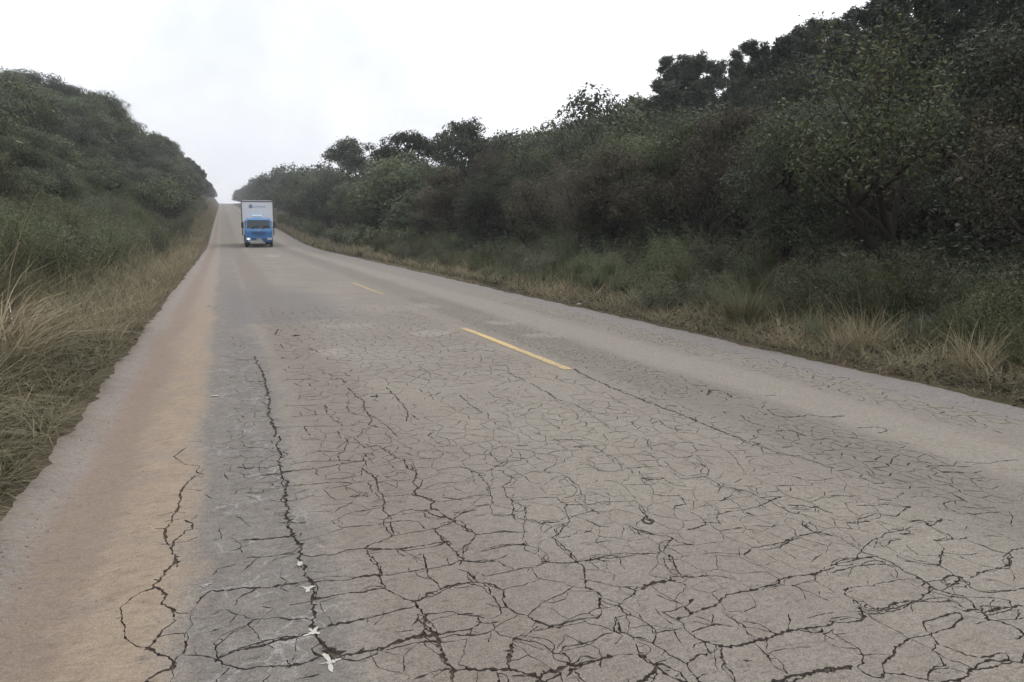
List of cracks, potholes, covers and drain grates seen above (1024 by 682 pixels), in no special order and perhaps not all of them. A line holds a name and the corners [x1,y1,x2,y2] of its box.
crack [117,305,1024,682]
